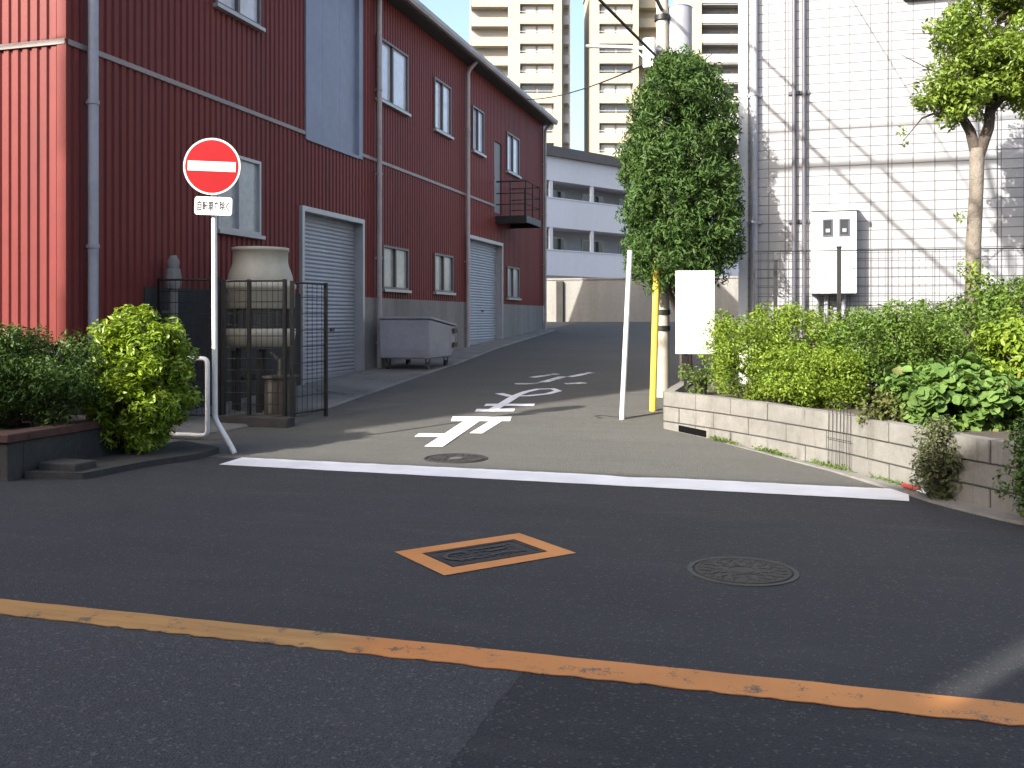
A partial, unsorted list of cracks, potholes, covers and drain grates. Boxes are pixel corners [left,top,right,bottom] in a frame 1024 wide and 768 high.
manhole cover [424,453,488,464]
manhole cover [687,556,800,587]
